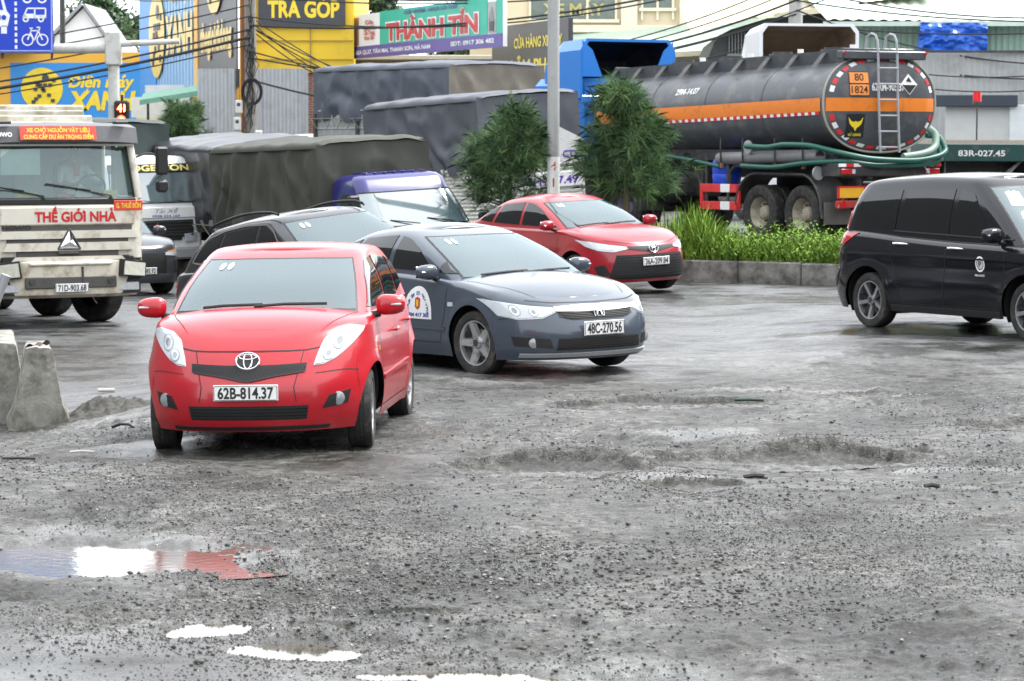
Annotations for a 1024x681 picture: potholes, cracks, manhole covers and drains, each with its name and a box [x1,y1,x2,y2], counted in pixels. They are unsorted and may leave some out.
pothole [544,394,779,410]
pothole [428,446,661,478]
pothole [641,438,954,473]
